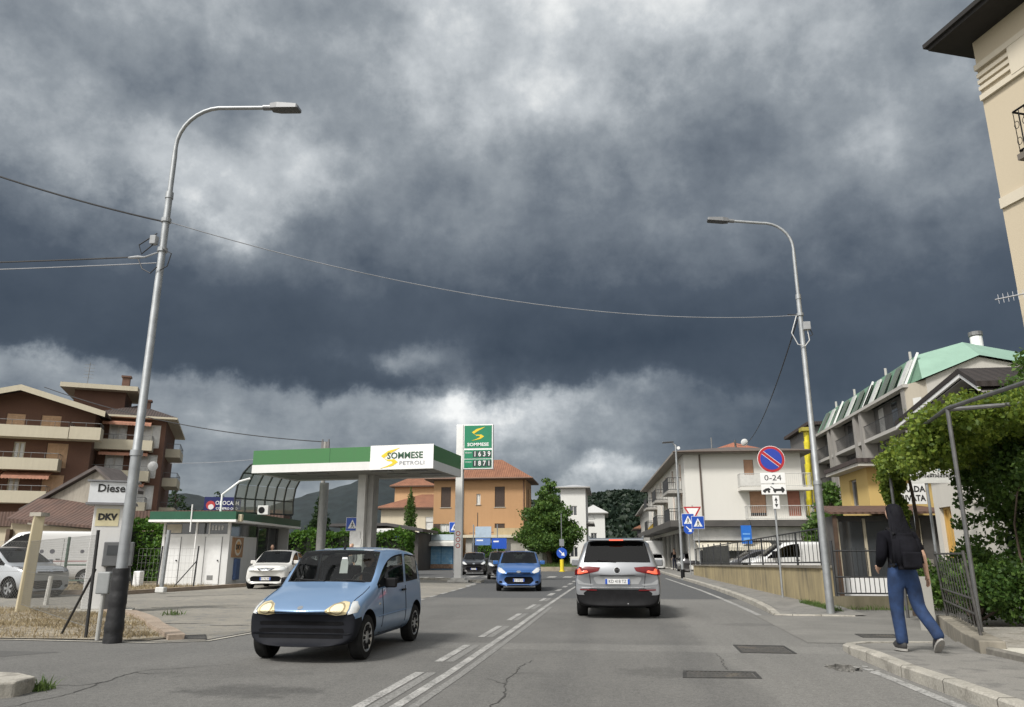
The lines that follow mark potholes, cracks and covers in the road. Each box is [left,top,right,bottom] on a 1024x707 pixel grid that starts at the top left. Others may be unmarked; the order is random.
crack [15,664,225,706]
manhole cover [733,645,797,654]
crack [487,660,532,707]
manhole cover [683,670,762,679]
pothole [824,664,863,672]
